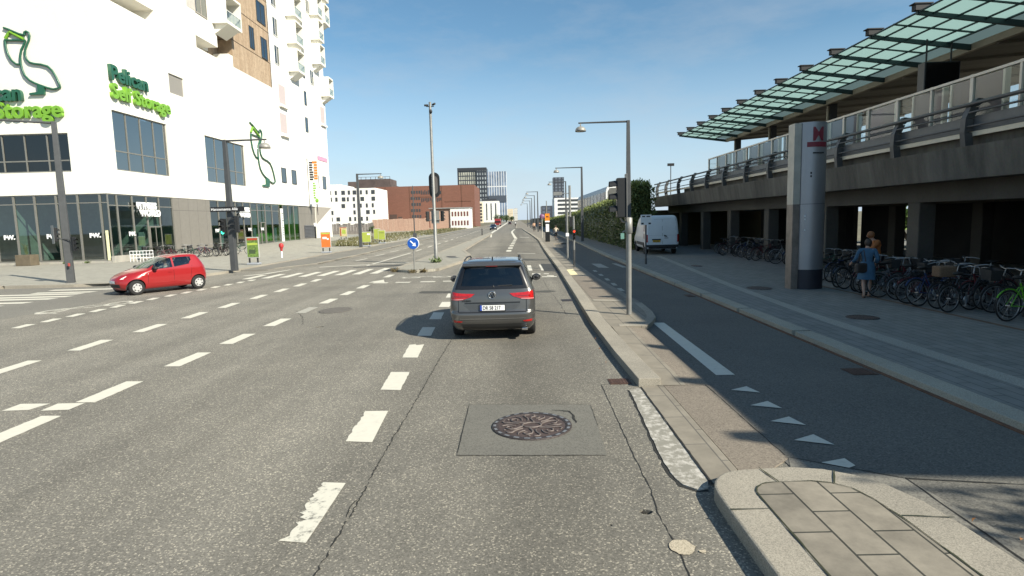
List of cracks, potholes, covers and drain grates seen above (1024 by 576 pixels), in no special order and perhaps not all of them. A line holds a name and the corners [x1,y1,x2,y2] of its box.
crack [627,387,714,492]
crack [313,339,452,576]
manhole cover [492,412,572,441]
